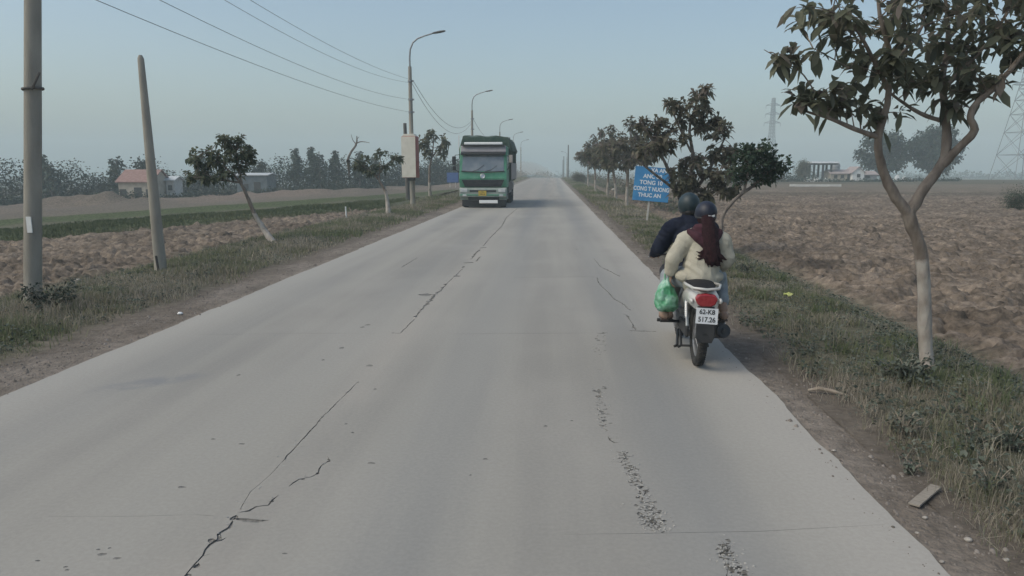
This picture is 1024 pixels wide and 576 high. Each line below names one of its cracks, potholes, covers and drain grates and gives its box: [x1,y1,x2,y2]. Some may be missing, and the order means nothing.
crack [184,387,356,576]
crack [592,369,675,533]
crack [594,259,656,332]
crack [387,210,515,334]
